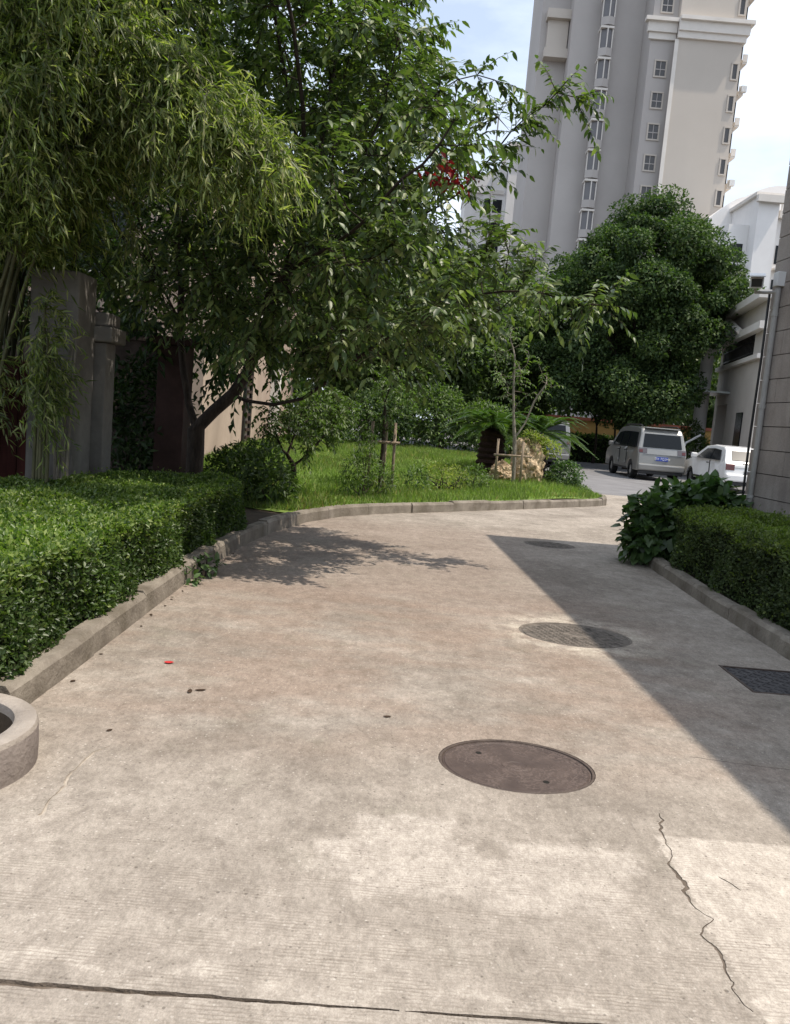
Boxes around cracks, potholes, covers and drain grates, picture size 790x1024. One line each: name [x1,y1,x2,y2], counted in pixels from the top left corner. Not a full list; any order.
manhole cover [519,622,632,648]
manhole cover [524,541,575,549]
crack [658,813,753,1012]
manhole cover [438,739,596,794]
crack [39,746,109,815]
